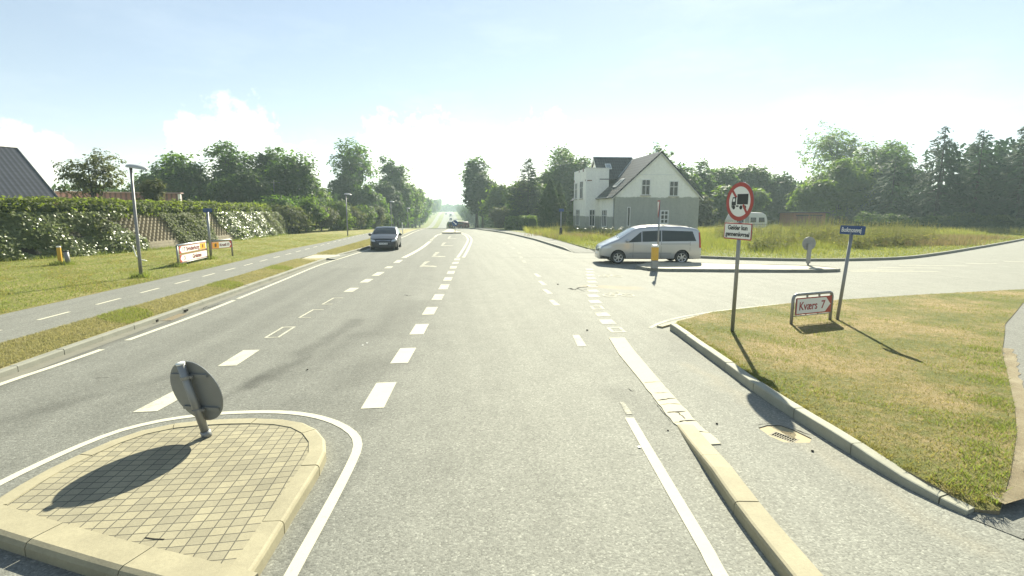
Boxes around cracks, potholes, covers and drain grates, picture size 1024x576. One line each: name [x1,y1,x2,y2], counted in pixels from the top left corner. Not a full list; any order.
drain grate [759,425,812,443]
